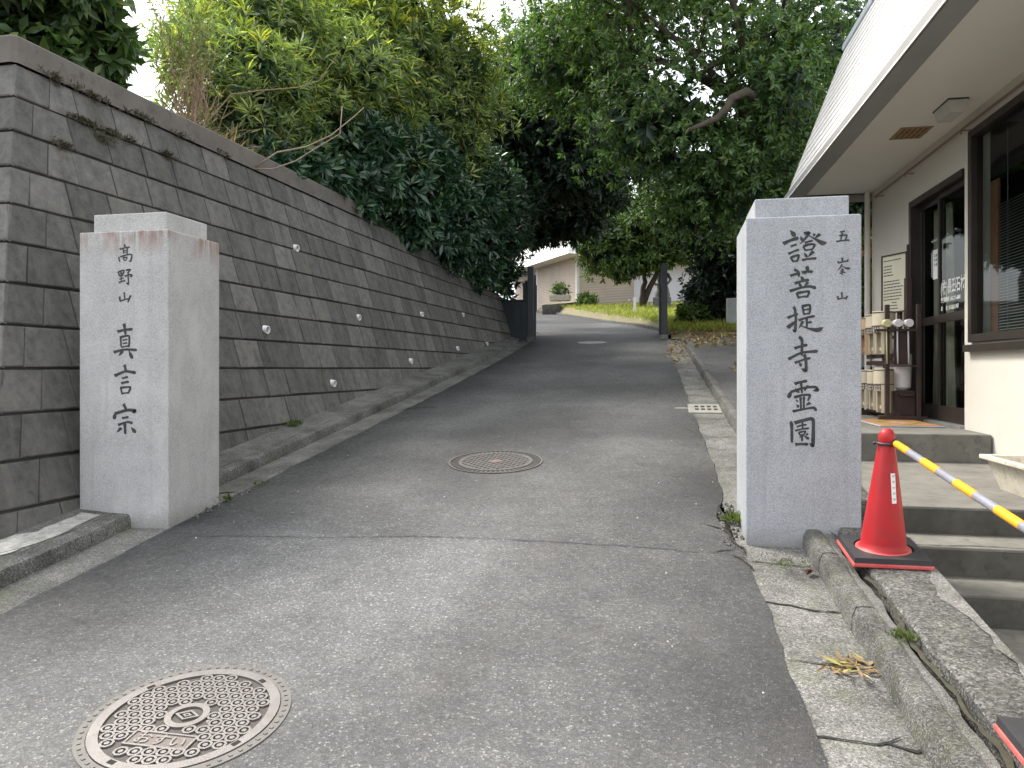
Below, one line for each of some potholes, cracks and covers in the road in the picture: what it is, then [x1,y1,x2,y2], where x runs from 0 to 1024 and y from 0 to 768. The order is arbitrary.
manhole cover [72,665,291,768]
crack [766,601,841,613]
manhole cover [448,450,543,474]
drain grate [675,404,722,414]
